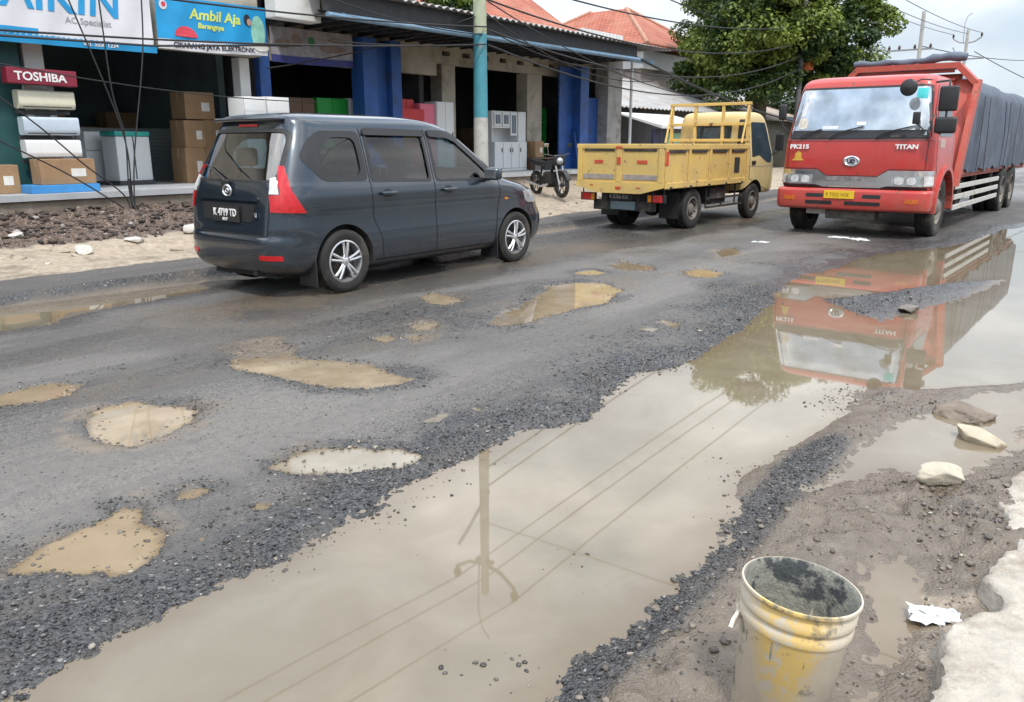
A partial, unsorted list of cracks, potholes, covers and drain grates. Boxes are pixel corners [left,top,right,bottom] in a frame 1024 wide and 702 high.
pothole [0,378,96,409]
pothole [476,280,629,328]
pothole [568,267,614,276]
pothole [602,260,660,271]
pothole [414,290,470,306]
pothole [72,396,213,449]
pothole [218,337,427,391]
pothole [394,331,433,342]
pothole [675,267,731,278]
pothole [258,439,432,480]
pothole [712,246,743,257]
pothole [0,498,178,583]
